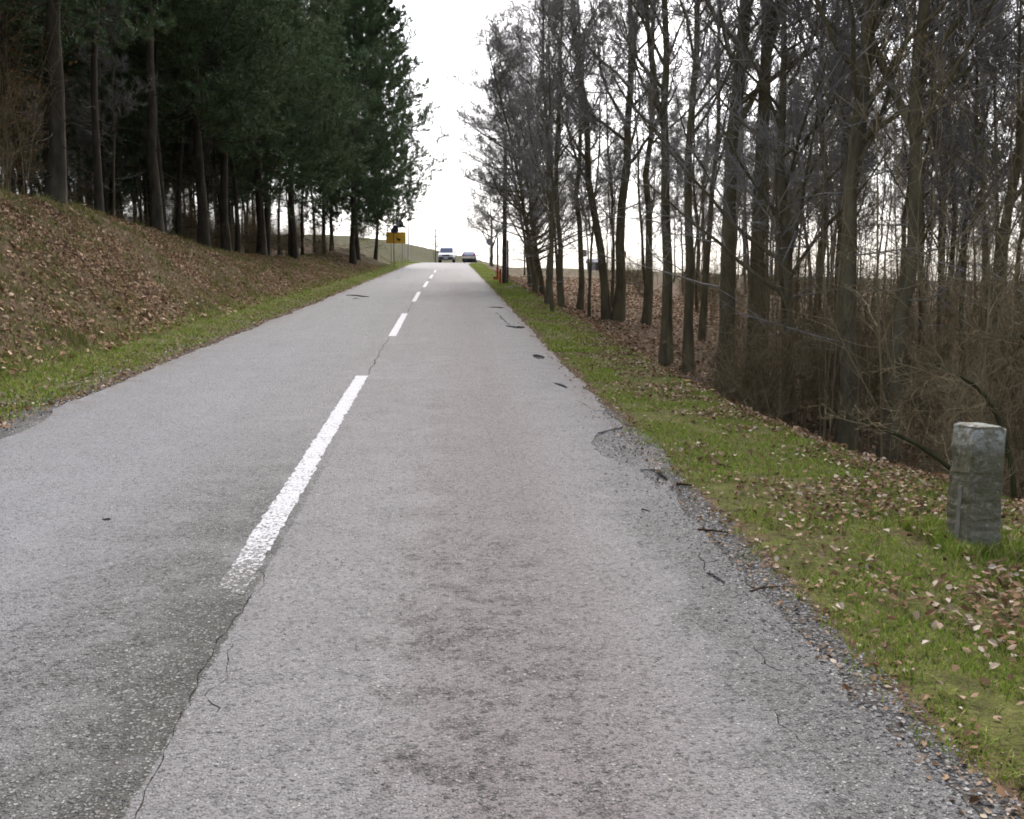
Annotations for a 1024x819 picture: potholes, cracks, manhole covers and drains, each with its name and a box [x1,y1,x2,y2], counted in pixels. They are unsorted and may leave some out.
pothole [591,427,673,470]
